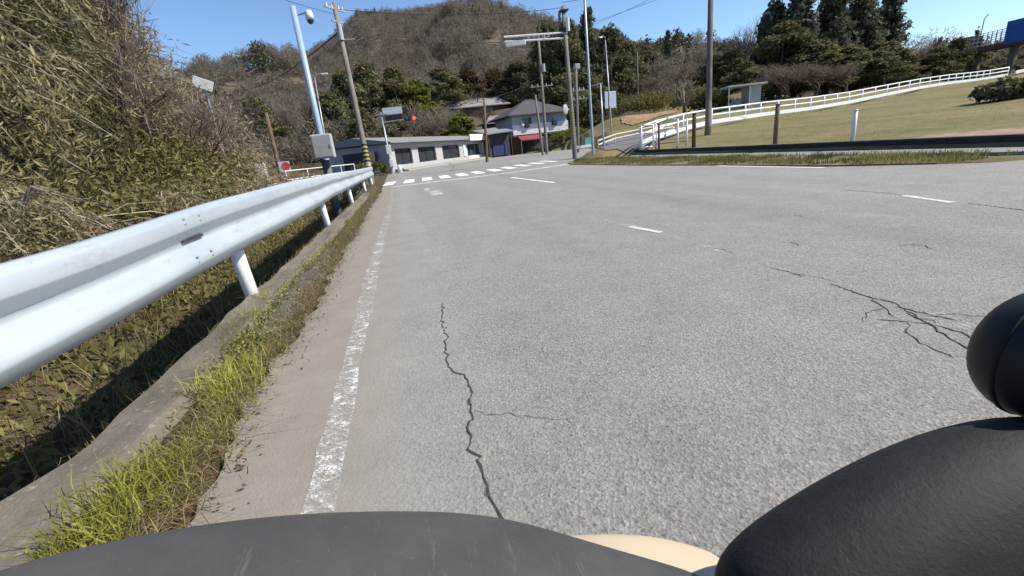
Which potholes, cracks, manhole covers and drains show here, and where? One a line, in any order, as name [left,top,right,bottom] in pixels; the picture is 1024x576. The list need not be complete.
crack [774,268,985,358]
crack [440,303,569,519]
